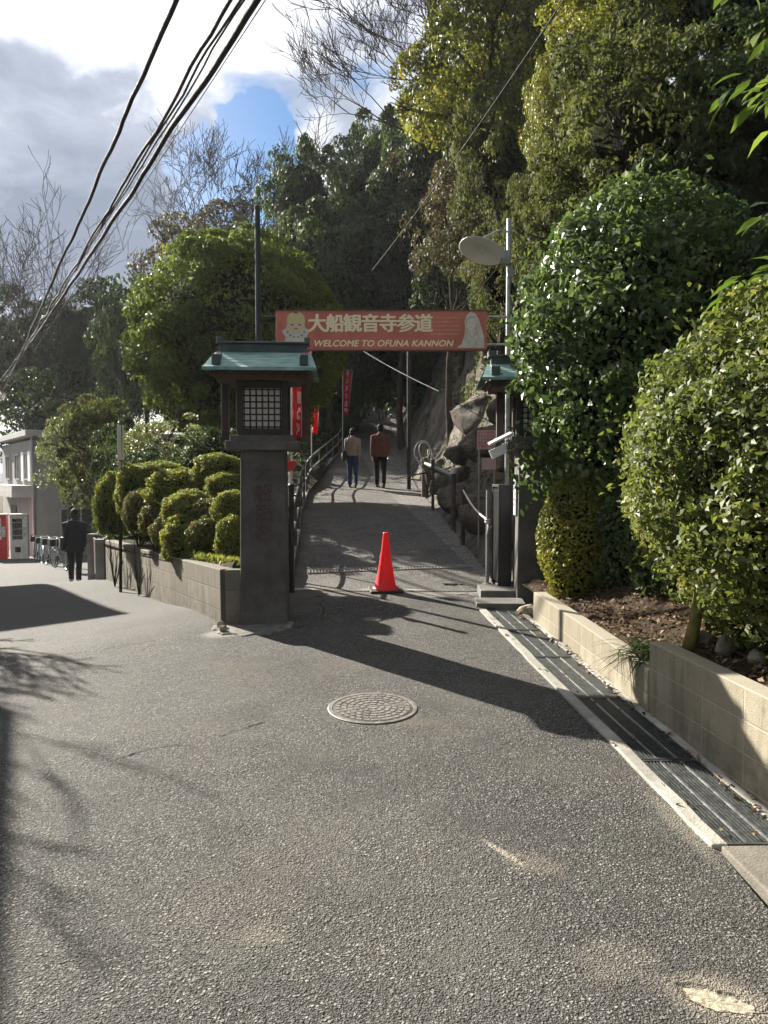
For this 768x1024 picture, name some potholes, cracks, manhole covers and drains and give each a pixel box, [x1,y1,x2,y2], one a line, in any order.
crack [109,721,265,762]
manhole cover [328,693,418,725]
